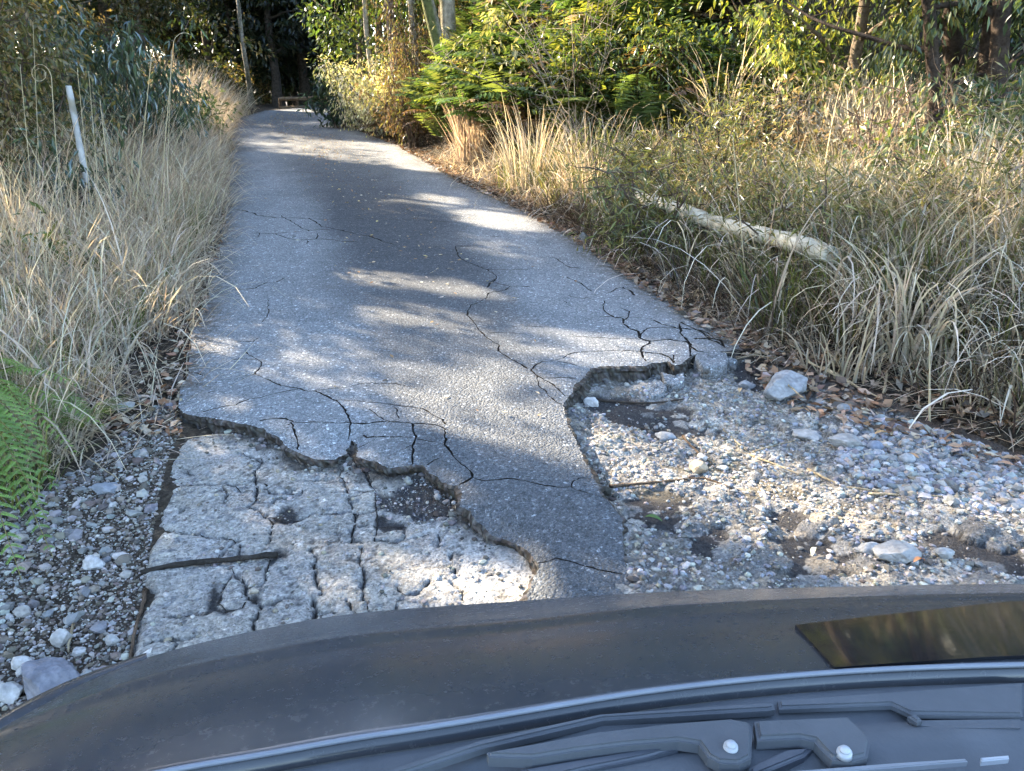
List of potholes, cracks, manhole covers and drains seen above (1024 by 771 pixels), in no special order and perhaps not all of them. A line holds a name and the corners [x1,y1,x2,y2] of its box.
crack [204,352,600,497]
crack [455,245,575,404]
crack [552,257,725,365]
crack [240,210,444,244]
crack [540,558,621,574]
pothole [124,407,544,658]
crack [150,453,463,644]
